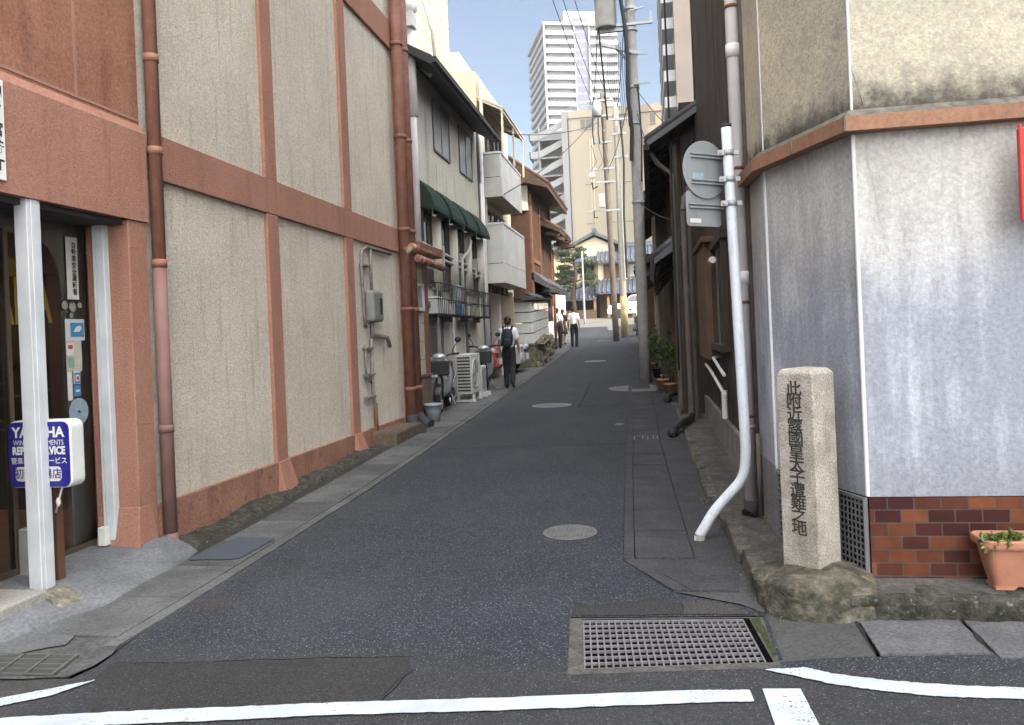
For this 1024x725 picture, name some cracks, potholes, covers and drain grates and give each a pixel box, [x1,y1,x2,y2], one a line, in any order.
drain grate [568,617,781,675]
manhole cover [543,524,597,540]
drain grate [0,653,79,678]
